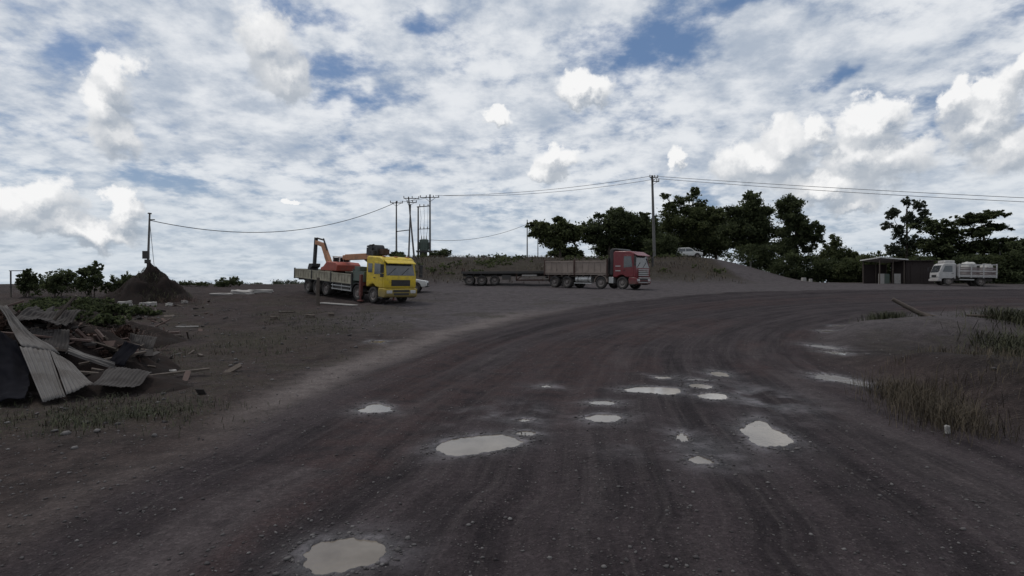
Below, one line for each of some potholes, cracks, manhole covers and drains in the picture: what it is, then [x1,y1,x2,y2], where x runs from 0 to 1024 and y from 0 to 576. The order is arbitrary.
pothole [350,402,398,415]
pothole [577,412,630,424]
pothole [681,453,724,468]
pothole [288,531,399,576]
pothole [509,429,542,438]
pothole [617,385,688,396]
pothole [732,416,802,450]
pothole [426,432,532,458]
pothole [691,392,734,401]
pothole [806,372,877,389]
pothole [671,431,696,445]
pothole [803,343,847,351]
